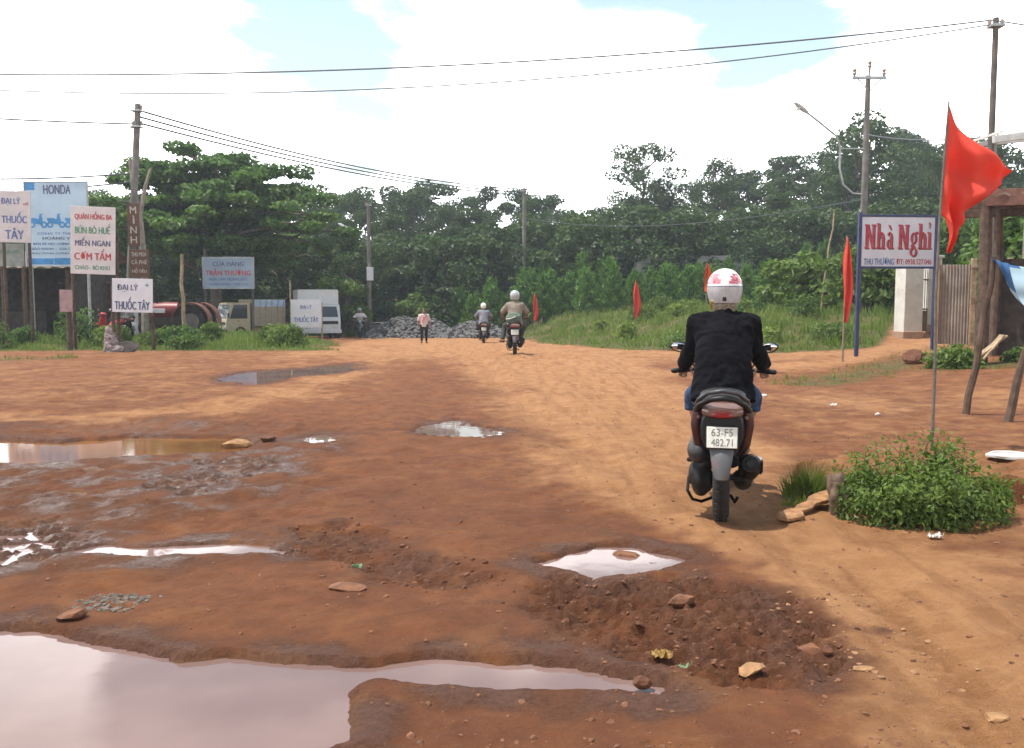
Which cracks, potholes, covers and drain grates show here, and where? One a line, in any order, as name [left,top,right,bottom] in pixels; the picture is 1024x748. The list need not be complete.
pothole [212,363,362,385]
pothole [128,454,292,497]
pothole [0,620,681,748]
pothole [0,433,264,463]
pothole [64,538,288,558]
pothole [517,571,861,692]
pothole [526,540,700,583]
pothole [400,418,514,438]
pothole [288,432,345,443]
